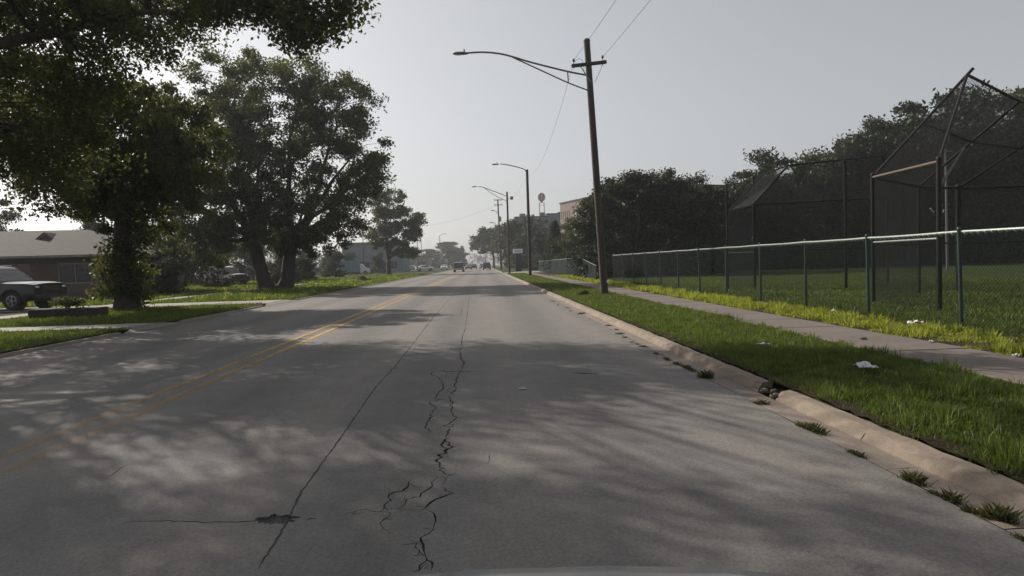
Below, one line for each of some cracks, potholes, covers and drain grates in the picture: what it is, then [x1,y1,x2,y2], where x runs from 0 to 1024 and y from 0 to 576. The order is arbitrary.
crack [345,301,483,573]
pothole [255,513,300,525]
